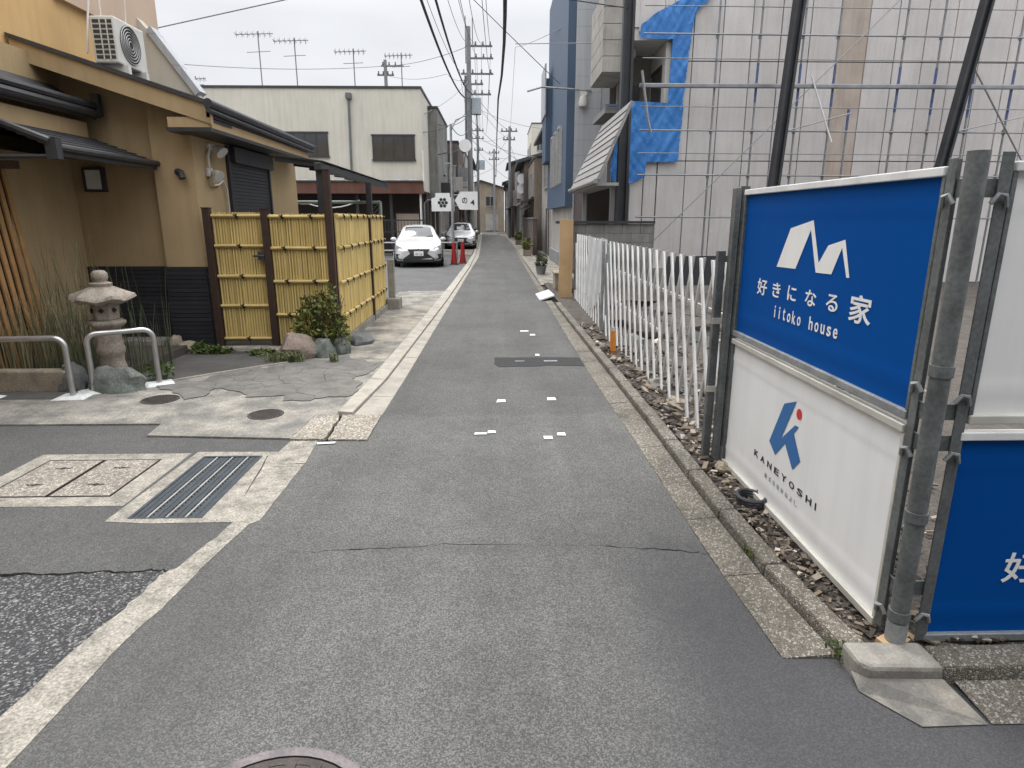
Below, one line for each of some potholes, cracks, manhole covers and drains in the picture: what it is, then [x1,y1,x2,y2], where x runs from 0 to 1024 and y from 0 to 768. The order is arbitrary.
manhole cover [0,460,104,498]
manhole cover [224,747,359,768]
drain grate [127,456,262,519]
manhole cover [140,394,180,405]
manhole cover [247,409,284,420]
manhole cover [47,460,161,497]
